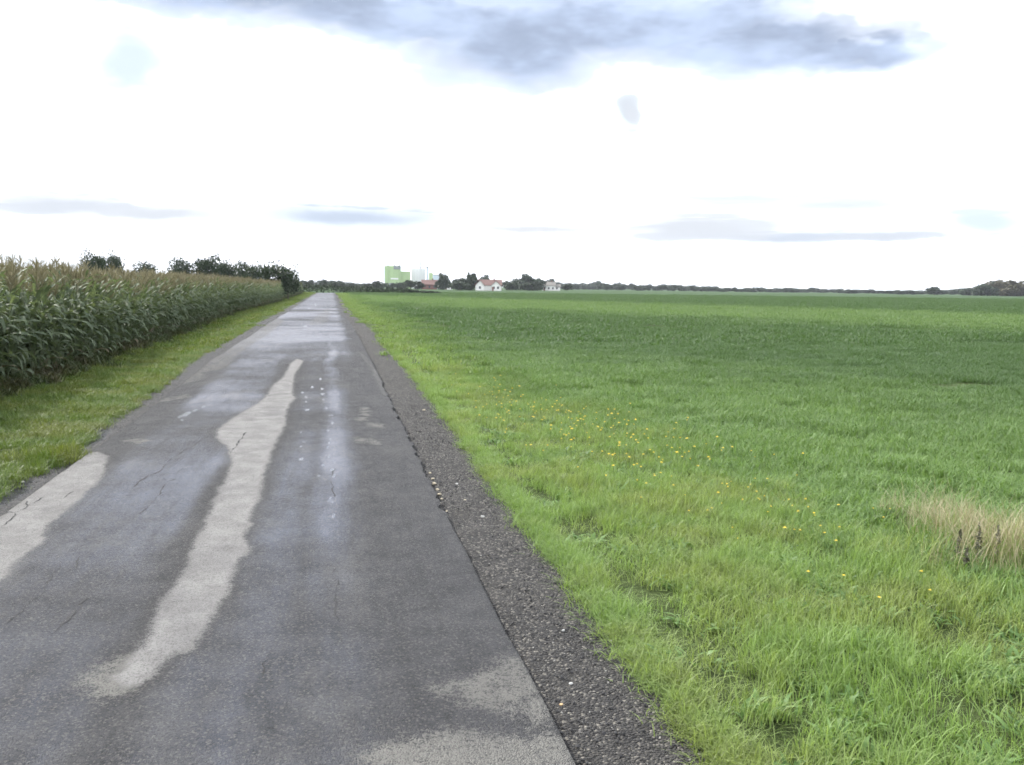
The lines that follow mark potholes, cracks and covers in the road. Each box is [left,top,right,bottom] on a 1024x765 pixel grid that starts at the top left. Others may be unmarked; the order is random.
crack [134,436,205,514]
crack [7,557,91,636]
